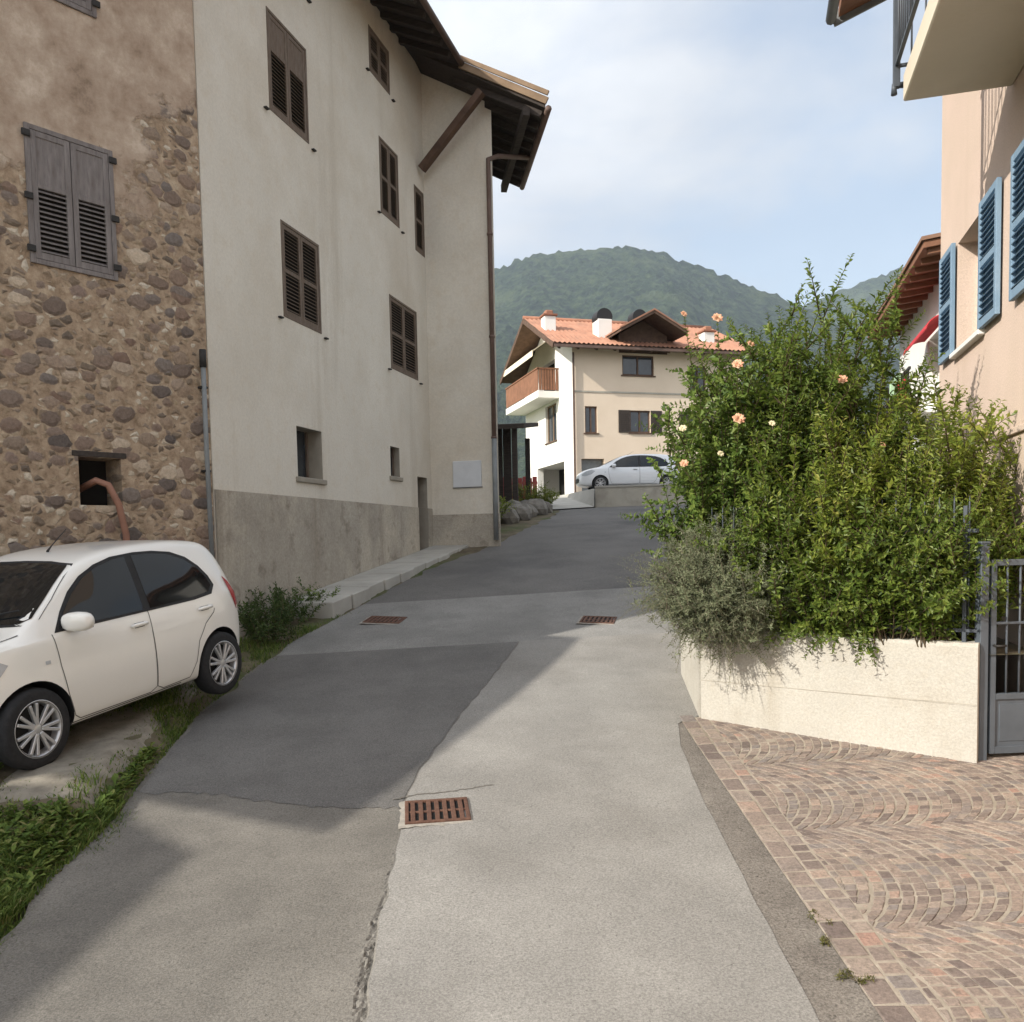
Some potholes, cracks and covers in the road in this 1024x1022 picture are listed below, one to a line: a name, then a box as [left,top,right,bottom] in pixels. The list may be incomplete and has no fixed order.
drain grate [398,797,473,829]
drain grate [360,616,407,625]
crack [332,835,400,1022]
drain grate [576,615,617,625]
